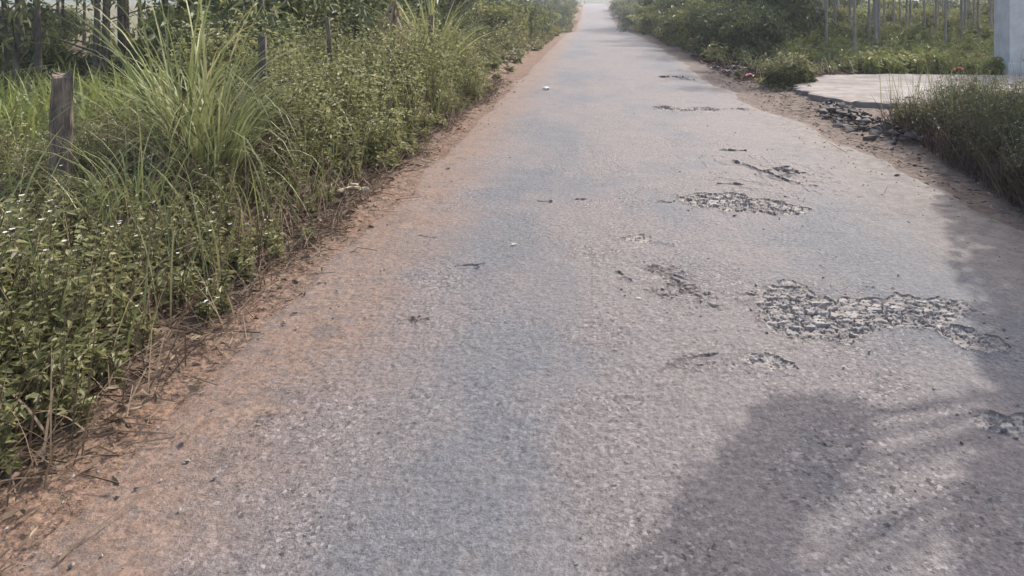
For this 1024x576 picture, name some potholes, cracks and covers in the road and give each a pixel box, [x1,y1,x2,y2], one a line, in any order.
pothole [971,410,1024,442]
pothole [737,352,796,370]
pothole [743,279,972,345]
pothole [935,324,1012,354]
crack [656,352,719,374]
